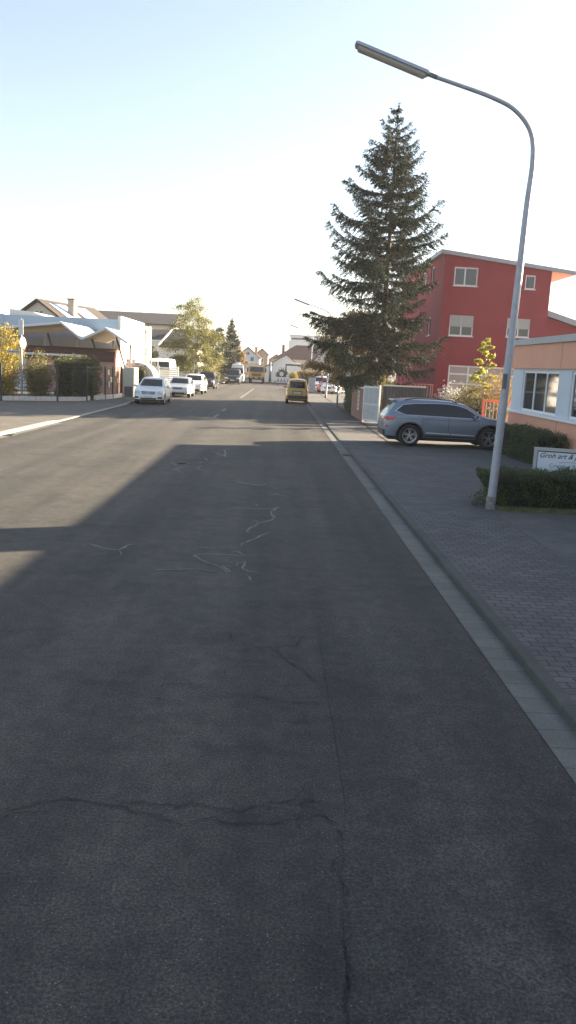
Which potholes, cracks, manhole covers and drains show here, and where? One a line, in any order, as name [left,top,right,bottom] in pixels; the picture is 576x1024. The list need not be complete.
crack [340,934,352,1024]
crack [1,782,343,838]
crack [224,633,319,683]
